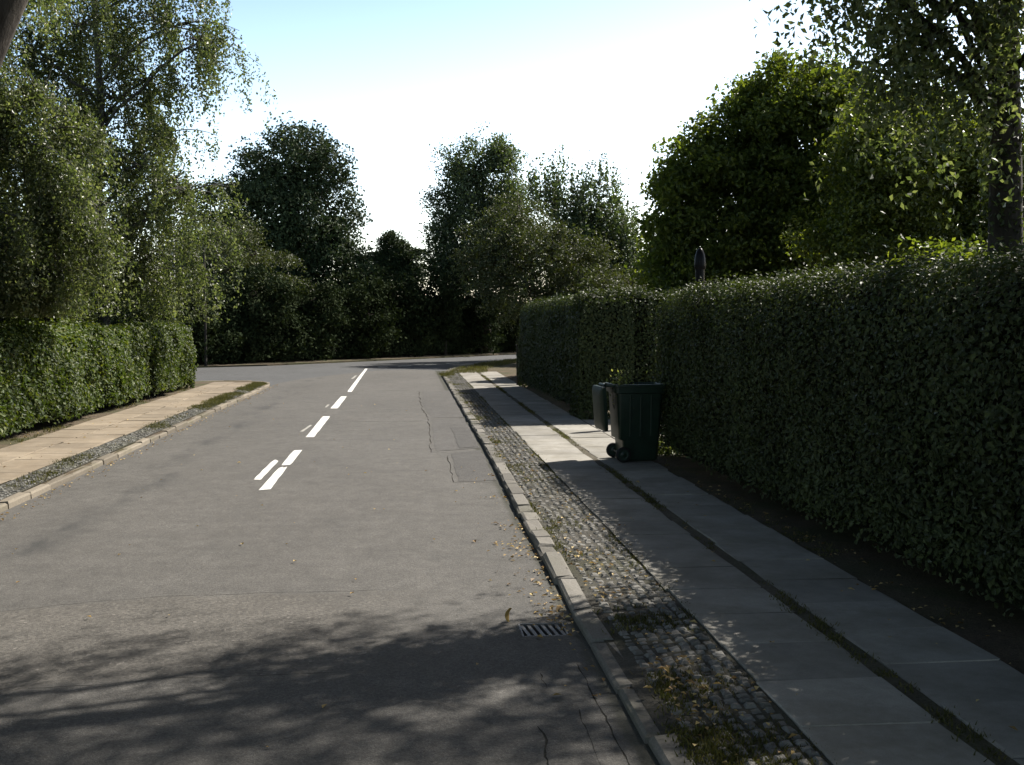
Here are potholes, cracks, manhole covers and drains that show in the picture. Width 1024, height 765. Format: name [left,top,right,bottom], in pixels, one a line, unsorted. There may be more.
crack [418,392,470,483]
crack [537,726,549,765]
crack [576,663,630,765]
